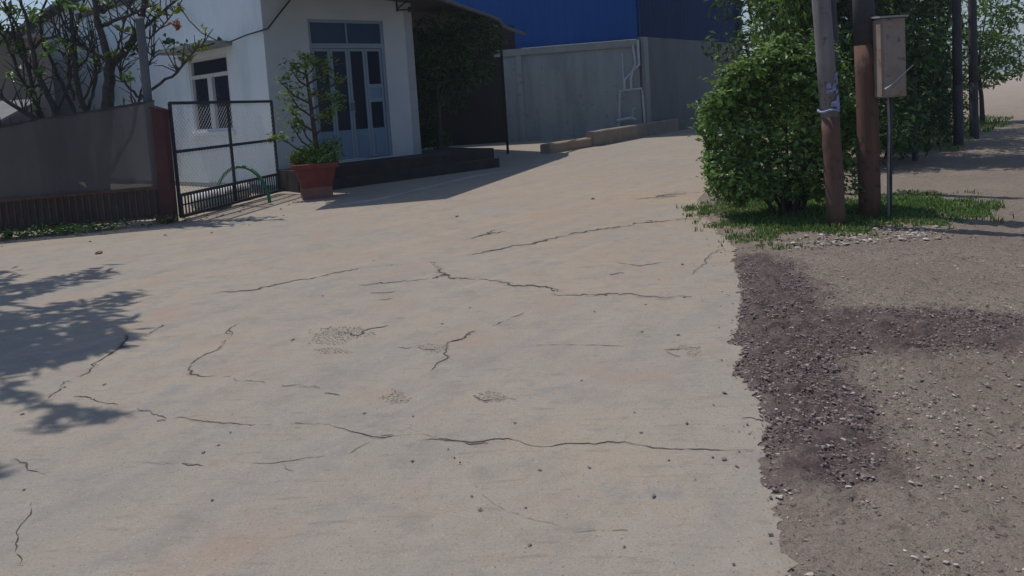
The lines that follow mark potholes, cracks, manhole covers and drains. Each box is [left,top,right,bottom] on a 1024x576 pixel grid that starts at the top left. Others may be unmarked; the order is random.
crack [215,262,692,300]
crack [15,503,32,565]
crack [468,218,706,255]
crack [47,325,755,471]
crack [397,312,524,369]
pothole [308,326,375,345]
